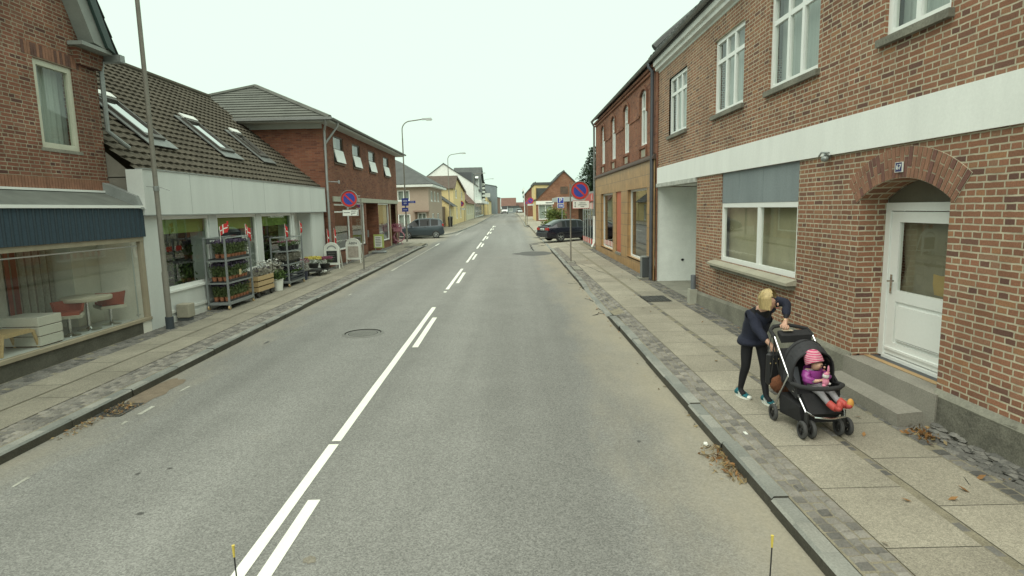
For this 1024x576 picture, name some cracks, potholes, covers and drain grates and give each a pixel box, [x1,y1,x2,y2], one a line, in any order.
manhole cover [342,329,384,338]
